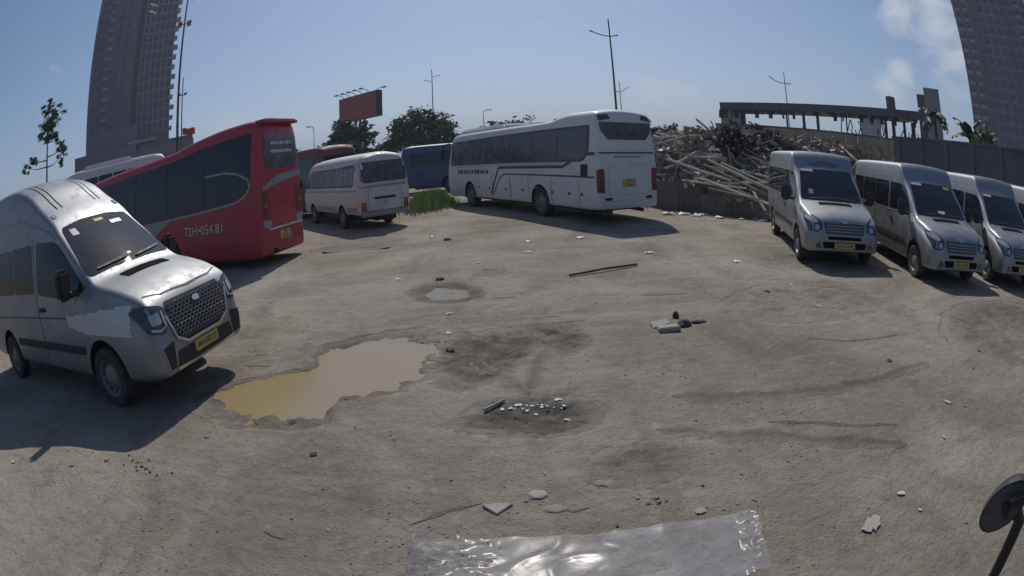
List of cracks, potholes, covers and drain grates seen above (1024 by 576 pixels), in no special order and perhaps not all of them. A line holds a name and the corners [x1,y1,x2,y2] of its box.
pothole [404,282,489,304]
pothole [190,327,448,432]
pothole [447,395,610,440]
